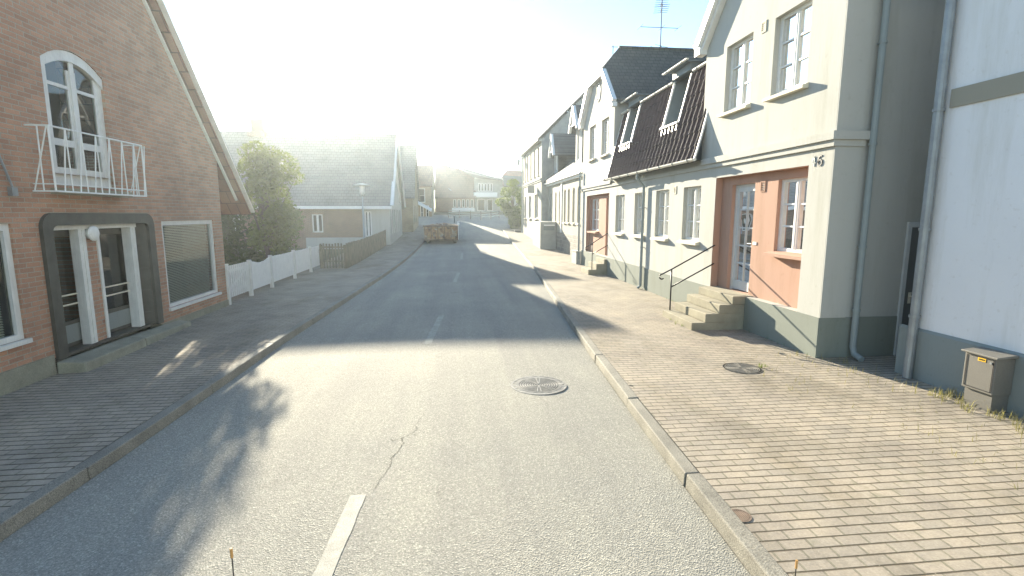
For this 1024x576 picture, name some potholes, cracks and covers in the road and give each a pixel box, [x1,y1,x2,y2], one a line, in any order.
manhole cover [511,376,567,395]
utility cover [731,509,752,522]
manhole cover [722,363,762,374]
